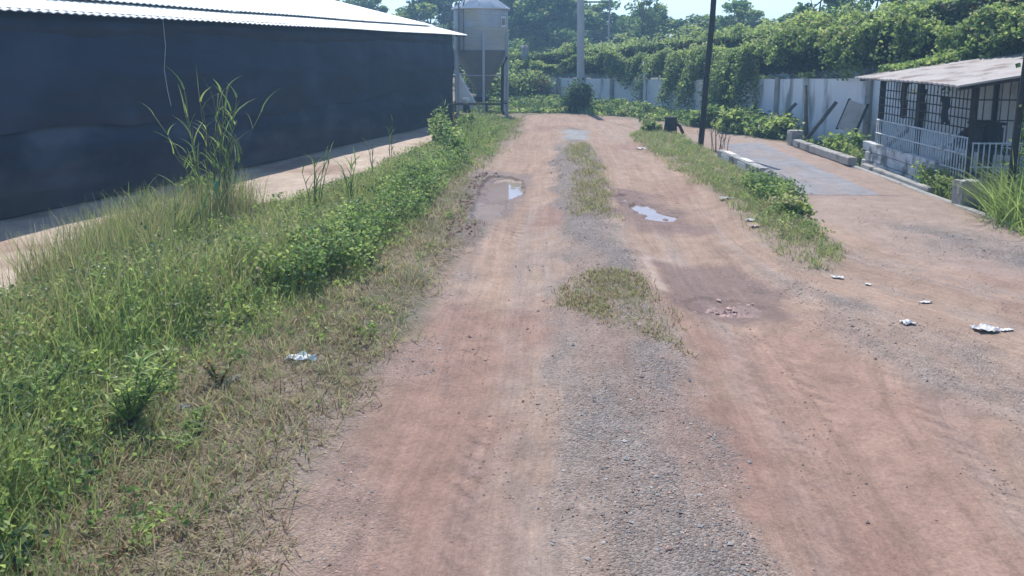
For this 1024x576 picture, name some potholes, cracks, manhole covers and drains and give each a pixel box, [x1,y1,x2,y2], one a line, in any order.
pothole [607,192,684,224]
pothole [463,174,532,224]
pothole [664,292,781,324]
